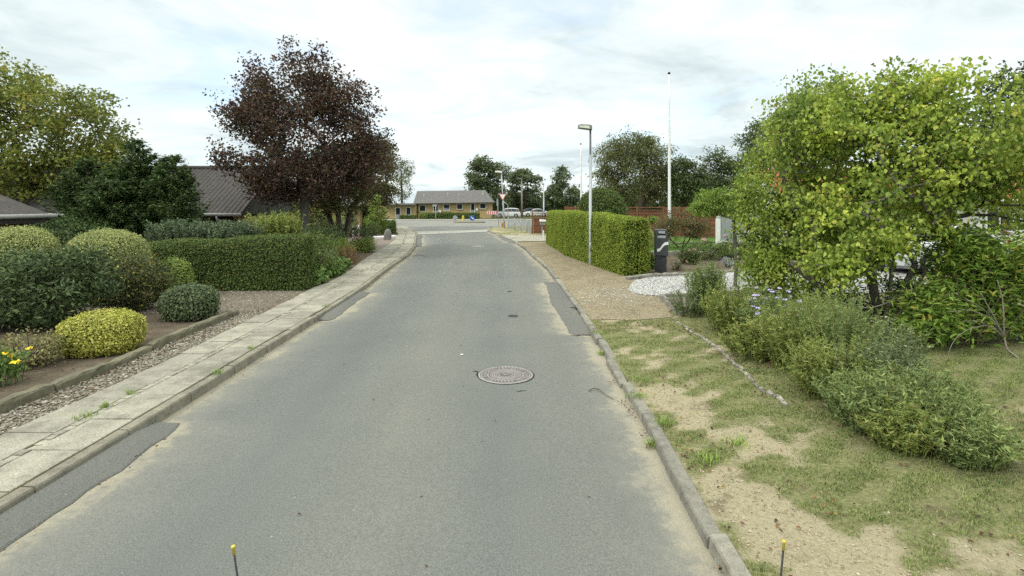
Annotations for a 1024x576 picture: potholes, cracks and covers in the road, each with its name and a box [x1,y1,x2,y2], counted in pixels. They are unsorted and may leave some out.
manhole cover [477,366,534,384]
